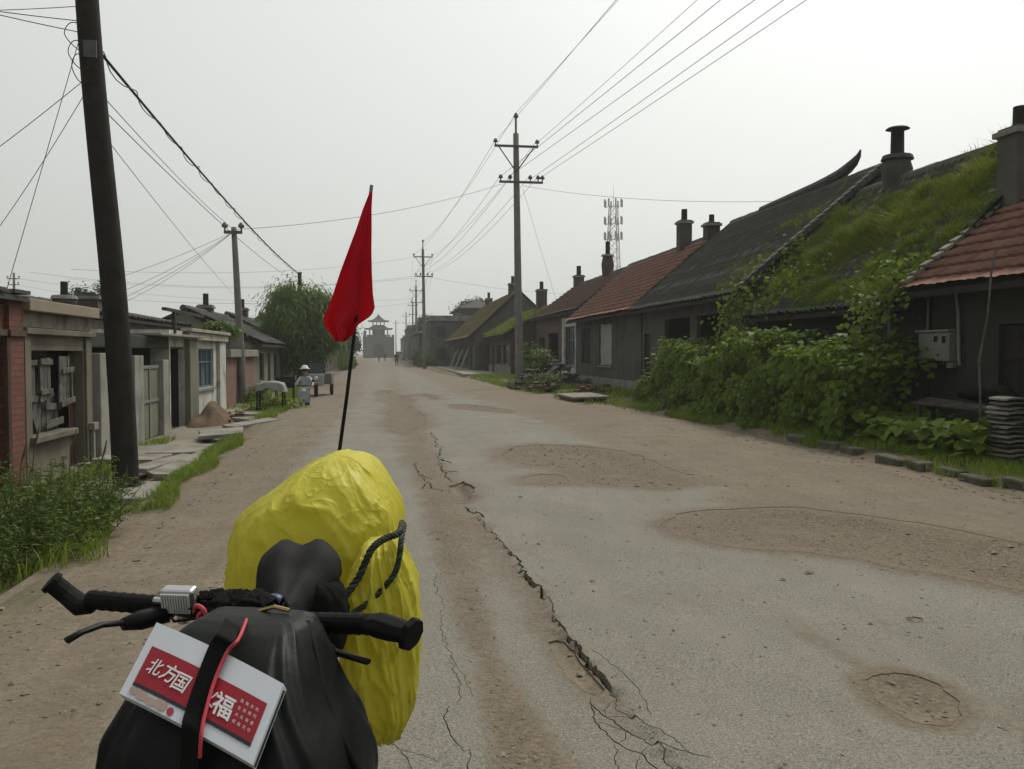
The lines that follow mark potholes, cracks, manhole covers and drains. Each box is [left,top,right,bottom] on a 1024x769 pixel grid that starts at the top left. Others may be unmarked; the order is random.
crack [413,432,457,492]
crack [392,571,473,769]
crack [464,507,711,769]
